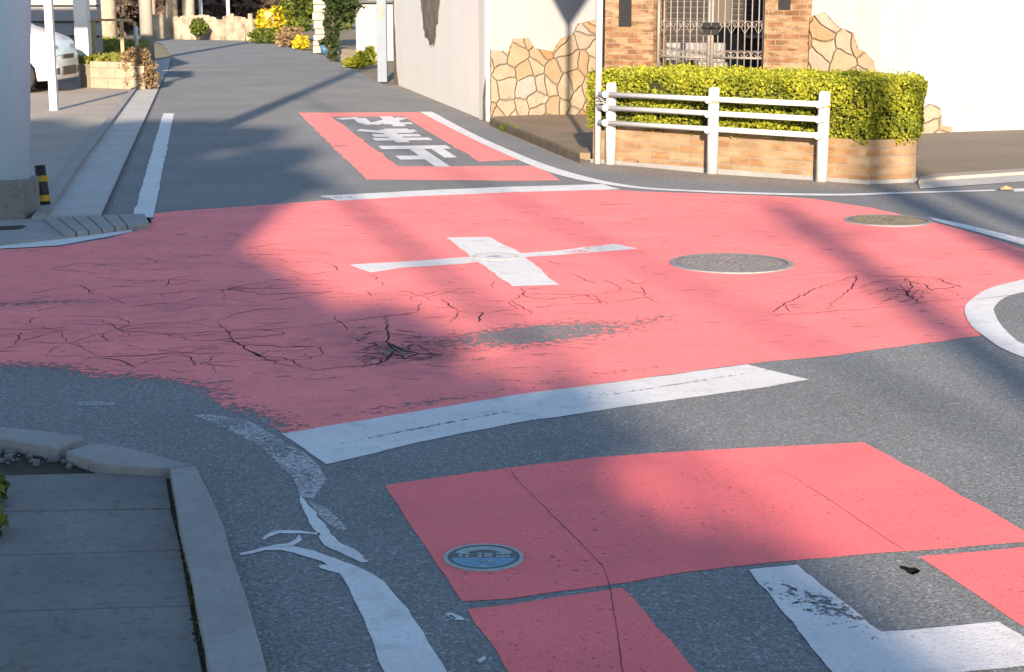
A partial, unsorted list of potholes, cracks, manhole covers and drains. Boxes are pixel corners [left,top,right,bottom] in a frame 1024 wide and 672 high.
manhole cover [845,214,932,227]
manhole cover [443,543,524,572]
crack [766,275,965,316]
manhole cover [669,253,794,274]
crack [511,471,624,672]
crack [5,244,659,372]
